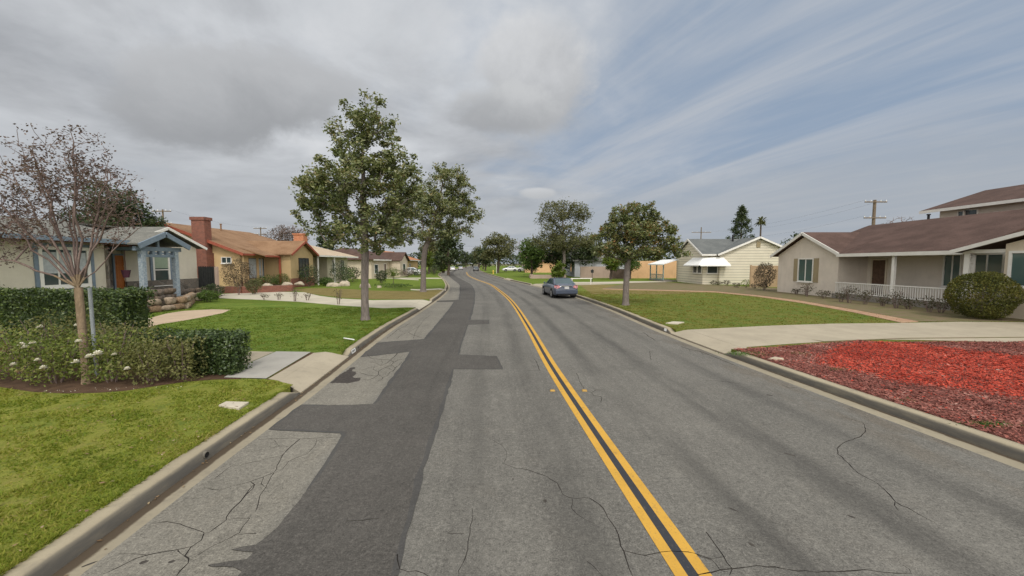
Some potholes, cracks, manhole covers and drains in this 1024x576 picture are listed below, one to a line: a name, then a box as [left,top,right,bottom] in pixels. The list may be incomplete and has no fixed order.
crack [837,416,937,524]
crack [107,437,328,576]
crack [496,442,690,576]
crack [697,532,912,575]
